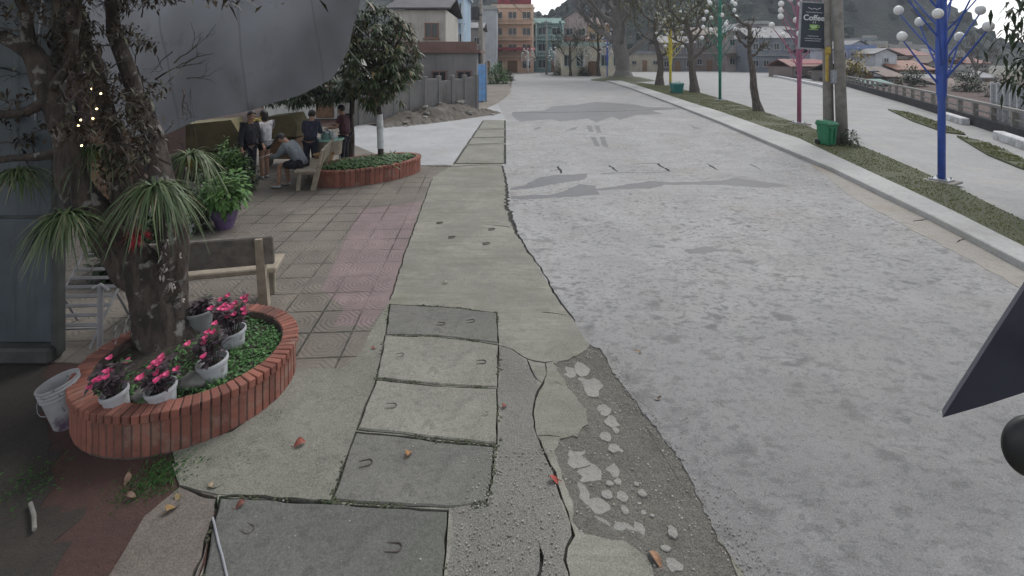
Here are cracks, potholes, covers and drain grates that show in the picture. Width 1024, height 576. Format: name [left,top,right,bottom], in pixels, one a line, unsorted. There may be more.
pothole [545,345,737,576]
crack [528,364,574,576]
crack [502,167,568,313]
